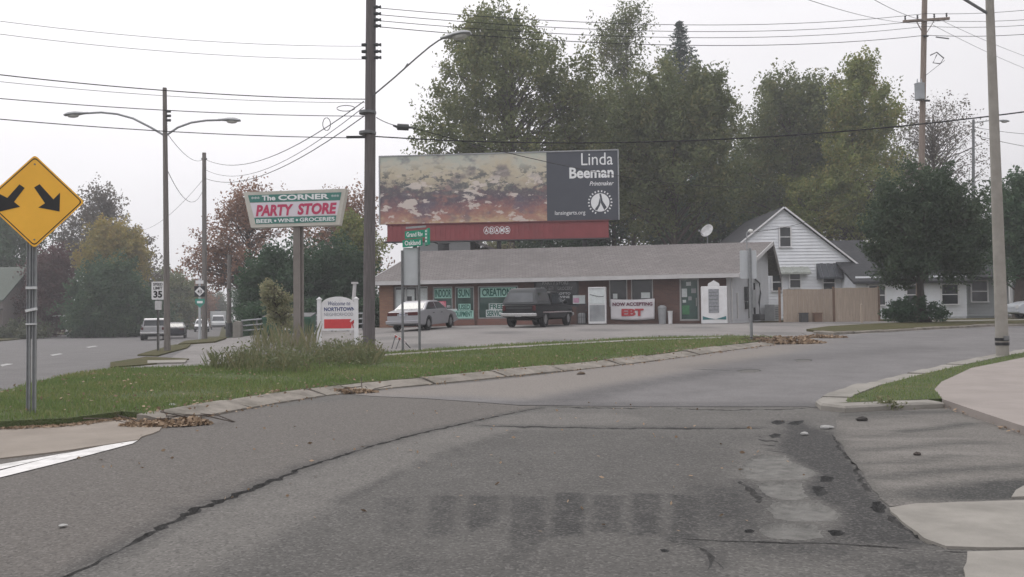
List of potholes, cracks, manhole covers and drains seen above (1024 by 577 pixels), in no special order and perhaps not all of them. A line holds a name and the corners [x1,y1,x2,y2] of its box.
pothole [812,486,828,497]
pothole [870,501,886,513]
